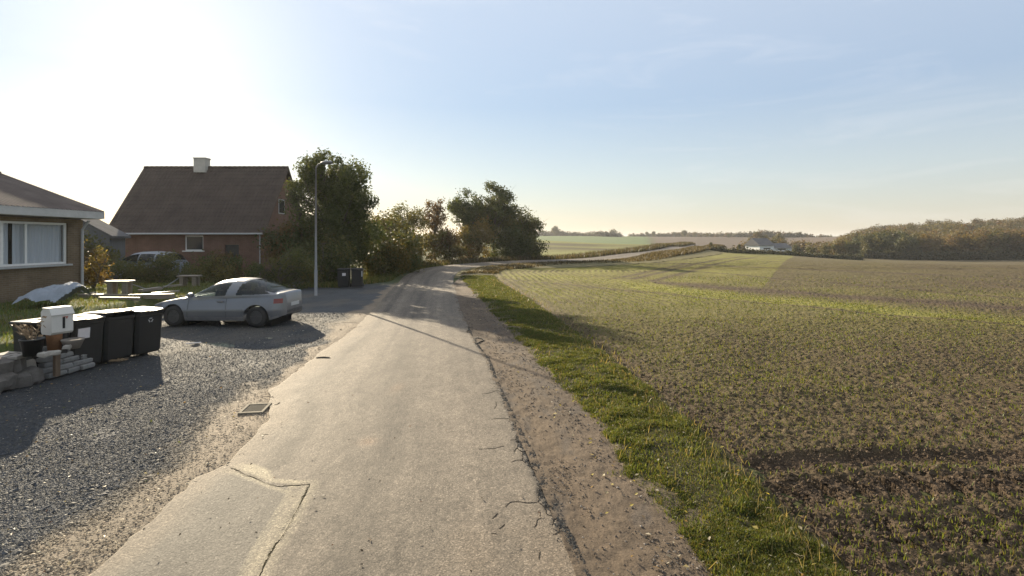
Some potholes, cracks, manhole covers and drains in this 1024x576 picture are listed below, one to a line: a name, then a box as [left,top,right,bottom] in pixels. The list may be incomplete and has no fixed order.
crack [484,390,560,535]
